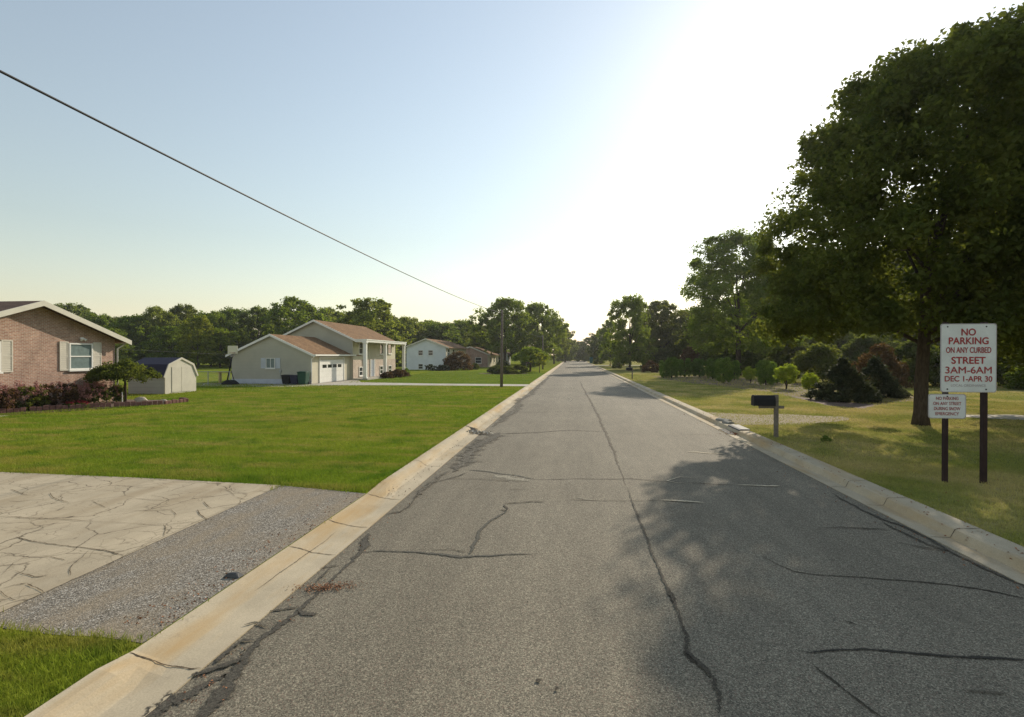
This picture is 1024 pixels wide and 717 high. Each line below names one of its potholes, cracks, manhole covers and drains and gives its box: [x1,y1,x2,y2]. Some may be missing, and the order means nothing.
crack [814,665,881,717]
crack [764,557,1022,598]
